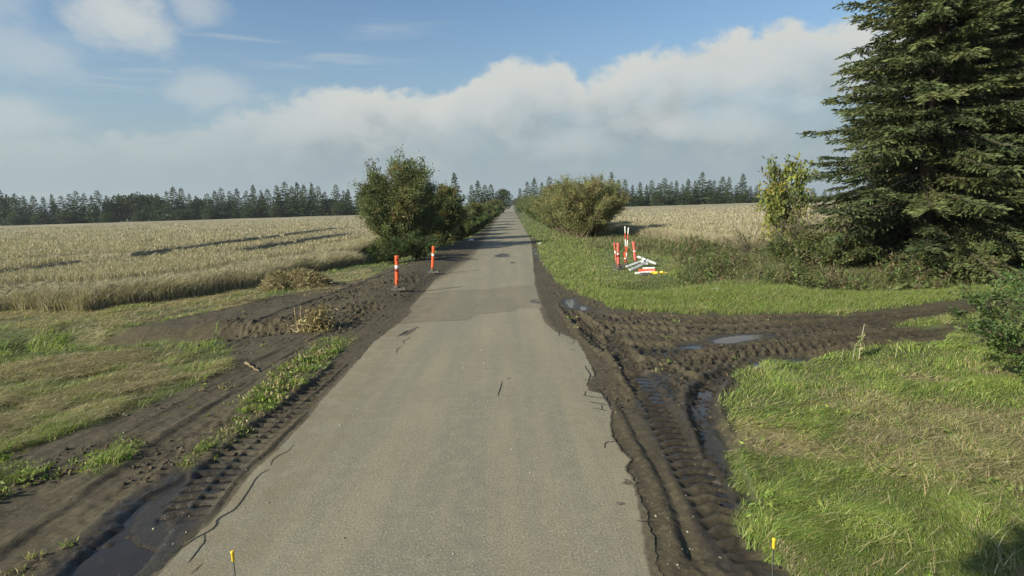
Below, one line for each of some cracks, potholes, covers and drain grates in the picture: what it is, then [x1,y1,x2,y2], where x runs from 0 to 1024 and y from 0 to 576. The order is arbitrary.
crack [559,332,611,411]
crack [178,448,291,574]
